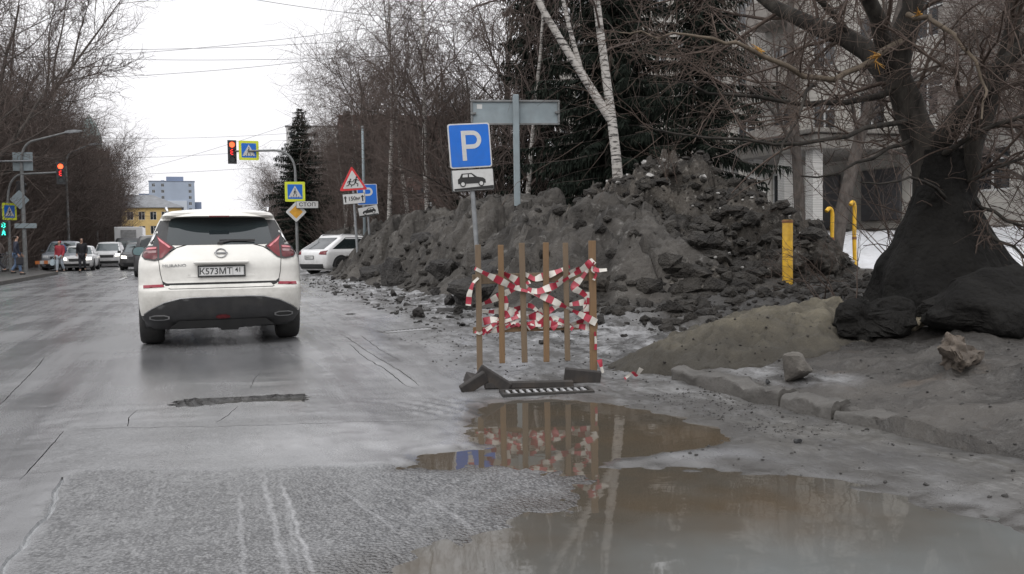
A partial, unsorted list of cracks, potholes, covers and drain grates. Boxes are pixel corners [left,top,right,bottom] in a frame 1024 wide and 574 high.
crack [99,406,425,429]
crack [341,334,417,388]
crack [0,432,64,574]
drain grate [499,386,595,397]
